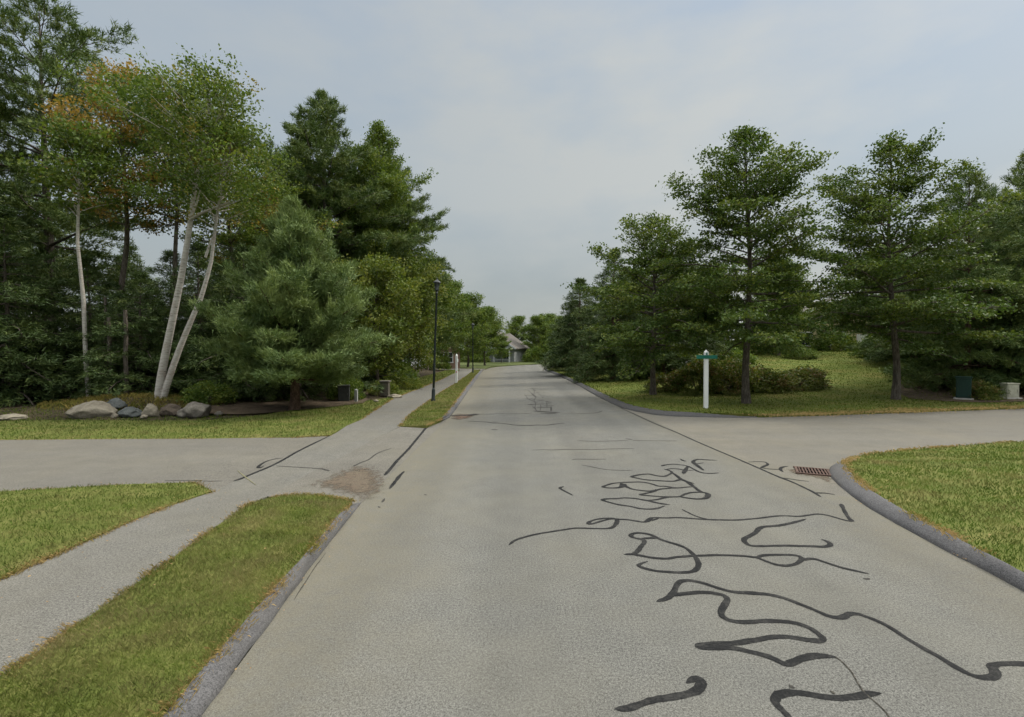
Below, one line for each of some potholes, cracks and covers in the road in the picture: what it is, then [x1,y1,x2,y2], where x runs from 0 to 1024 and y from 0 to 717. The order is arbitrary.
crack [451,383,562,426]
drain grate [793,466,831,477]
crack [542,440,643,470]
